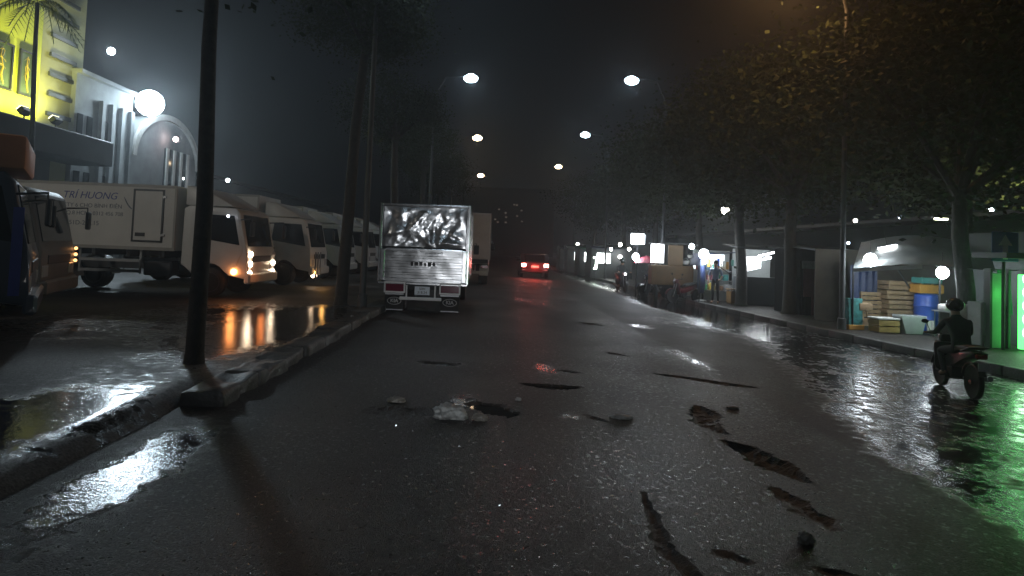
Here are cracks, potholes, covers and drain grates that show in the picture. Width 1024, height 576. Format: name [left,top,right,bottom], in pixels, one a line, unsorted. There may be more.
pothole [463,401,523,419]
pothole [640,491,704,576]
pothole [719,440,815,483]
pothole [711,549,756,566]
pothole [650,373,760,389]
pothole [686,405,733,435]
pothole [766,486,849,533]
